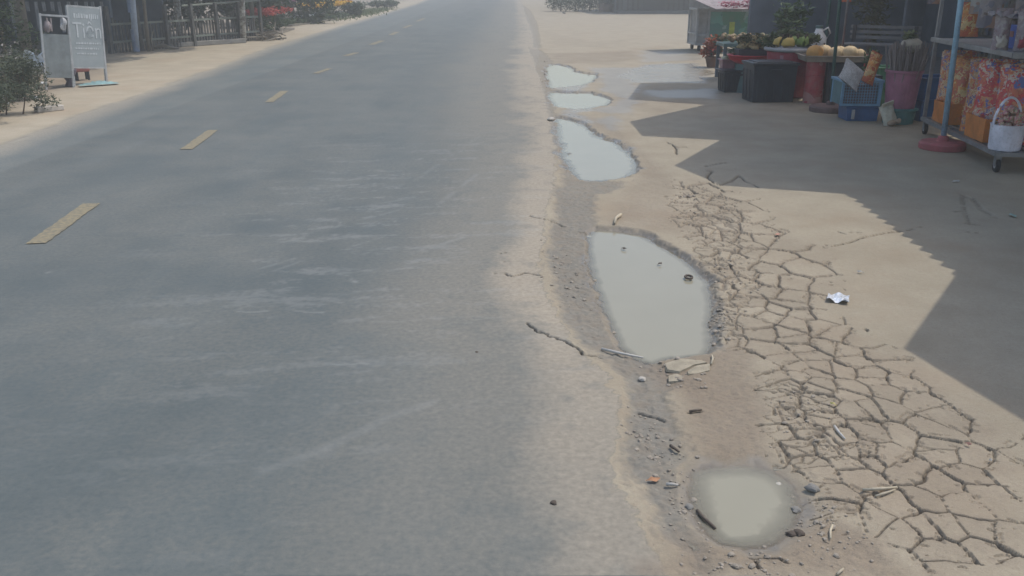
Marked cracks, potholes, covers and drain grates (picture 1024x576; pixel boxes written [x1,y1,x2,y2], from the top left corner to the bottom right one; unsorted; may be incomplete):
crack [668,162,1024,565]
pothole [549,114,647,183]
pothole [544,90,615,109]
pothole [540,63,600,89]
pothole [656,445,848,570]
pothole [578,224,727,369]
crack [528,325,602,359]
